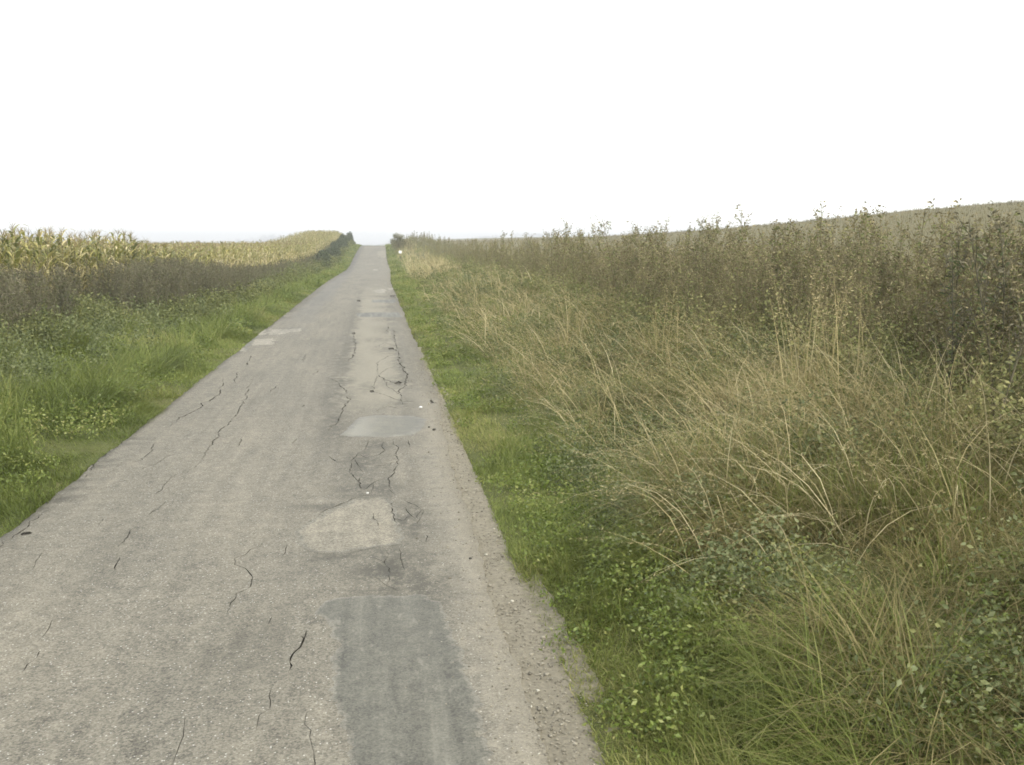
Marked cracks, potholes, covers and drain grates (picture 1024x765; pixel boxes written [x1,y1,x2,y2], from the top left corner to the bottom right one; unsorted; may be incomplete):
crack [373,326,412,411]
crack [108,444,175,576]
